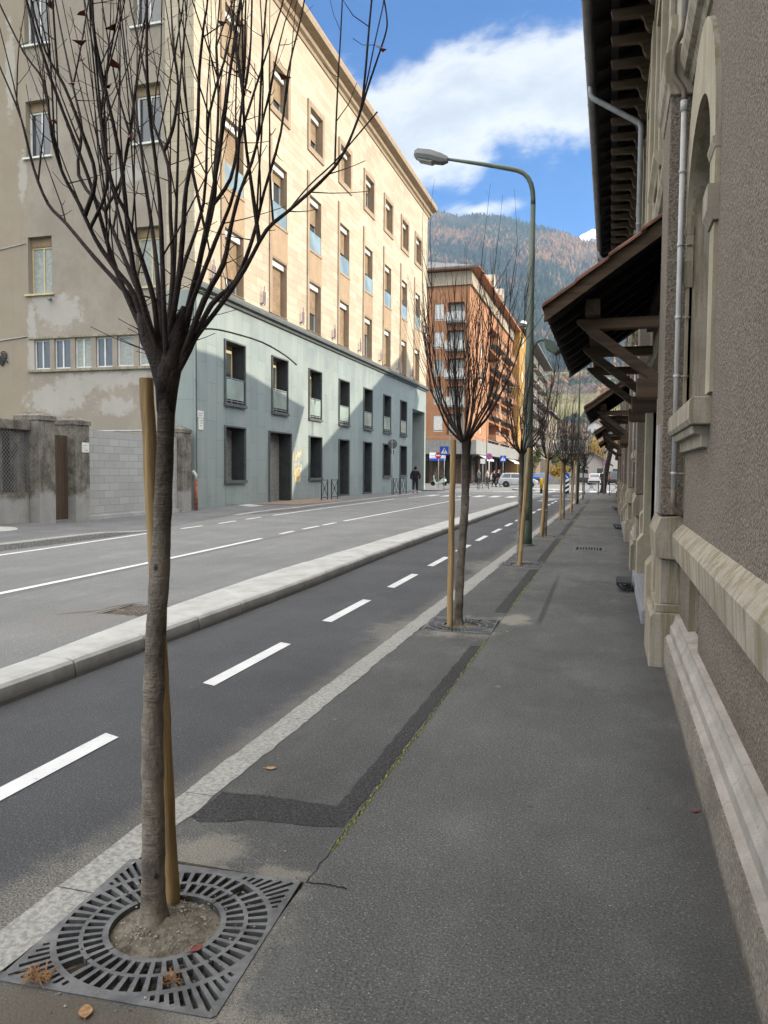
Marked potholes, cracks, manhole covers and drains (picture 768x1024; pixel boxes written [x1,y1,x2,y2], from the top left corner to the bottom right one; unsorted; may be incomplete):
drain grate [96,604,147,617]
